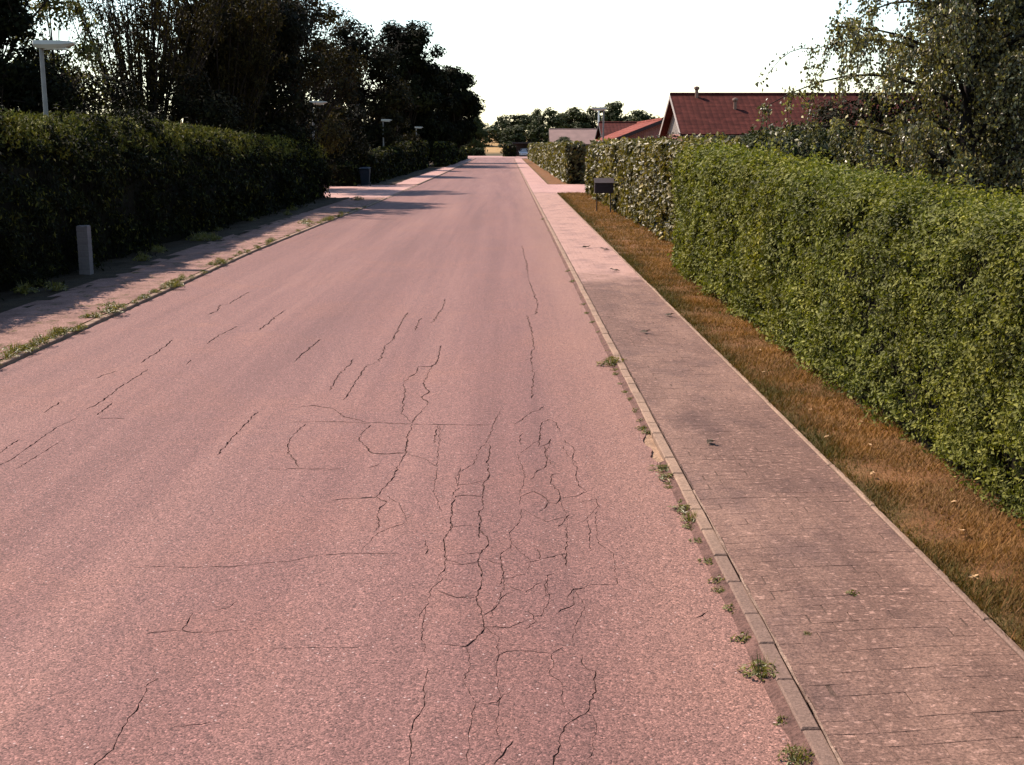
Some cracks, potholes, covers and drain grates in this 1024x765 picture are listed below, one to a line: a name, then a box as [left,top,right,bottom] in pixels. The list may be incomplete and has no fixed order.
crack [150,601,237,633]
crack [287,300,459,548]
crack [94,678,158,765]
crack [0,292,249,468]
crack [522,248,539,398]
crack [156,553,395,568]
crack [217,412,259,455]
